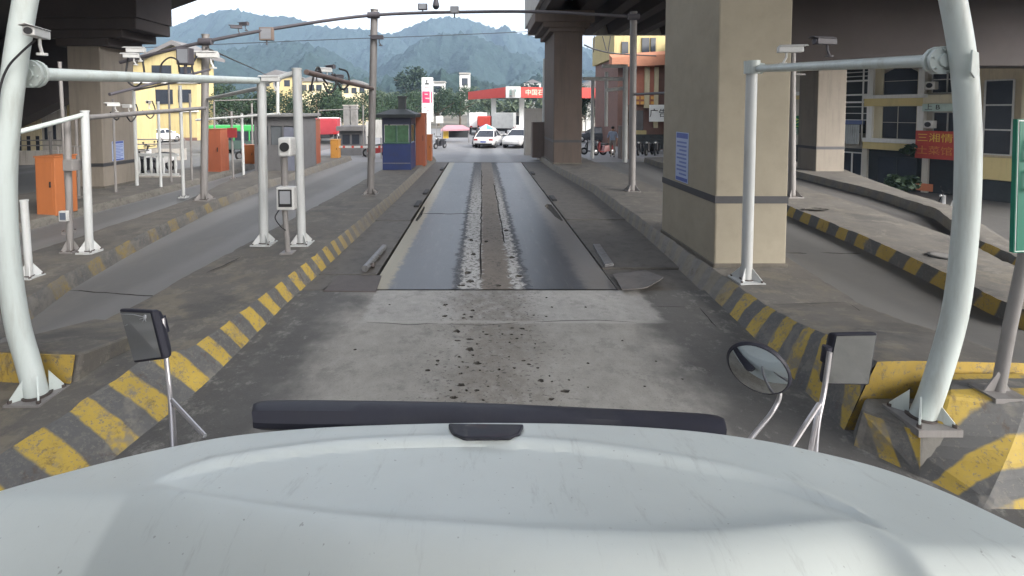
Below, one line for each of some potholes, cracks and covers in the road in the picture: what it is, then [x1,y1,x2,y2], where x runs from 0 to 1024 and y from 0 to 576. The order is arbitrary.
manhole cover [926,252,949,260]
